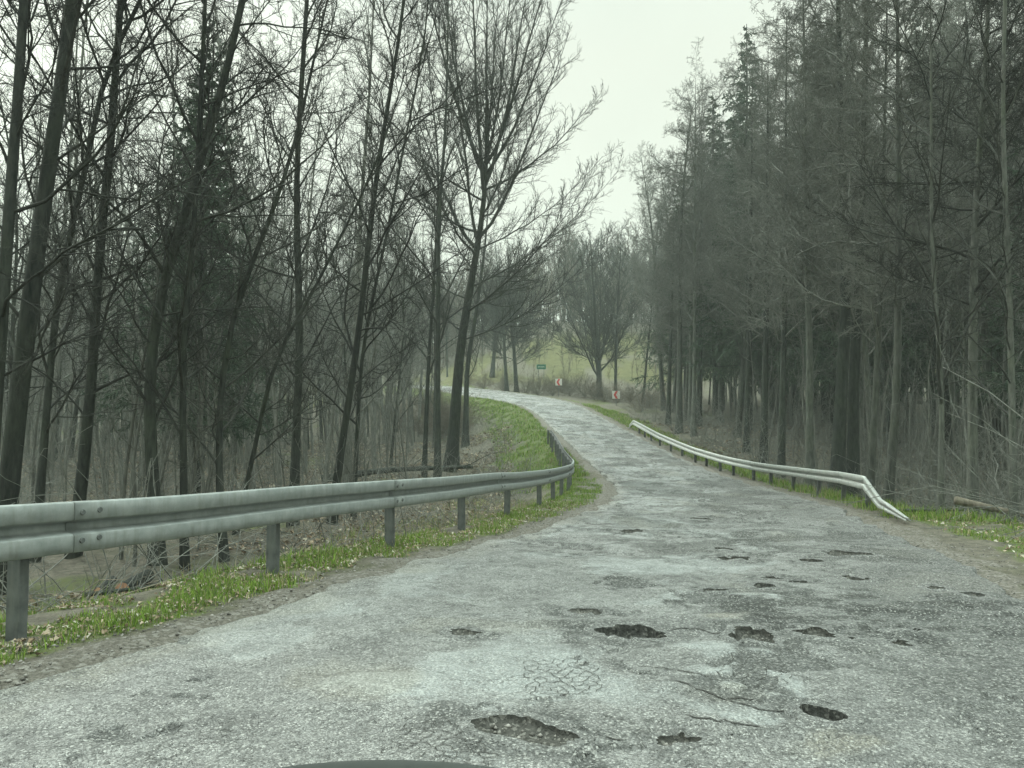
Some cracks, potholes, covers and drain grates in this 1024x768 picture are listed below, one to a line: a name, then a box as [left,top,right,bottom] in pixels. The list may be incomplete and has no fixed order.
pothole [439,626,493,639]
pothole [870,638,927,649]
pothole [455,710,597,754]
pothole [812,549,884,558]
pothole [558,606,614,617]
pothole [948,591,996,599]
crack [638,652,811,727]
pothole [833,574,880,582]
pothole [639,727,720,752]
pothole [780,624,851,642]
crack [523,658,602,695]
pothole [783,697,866,729]
